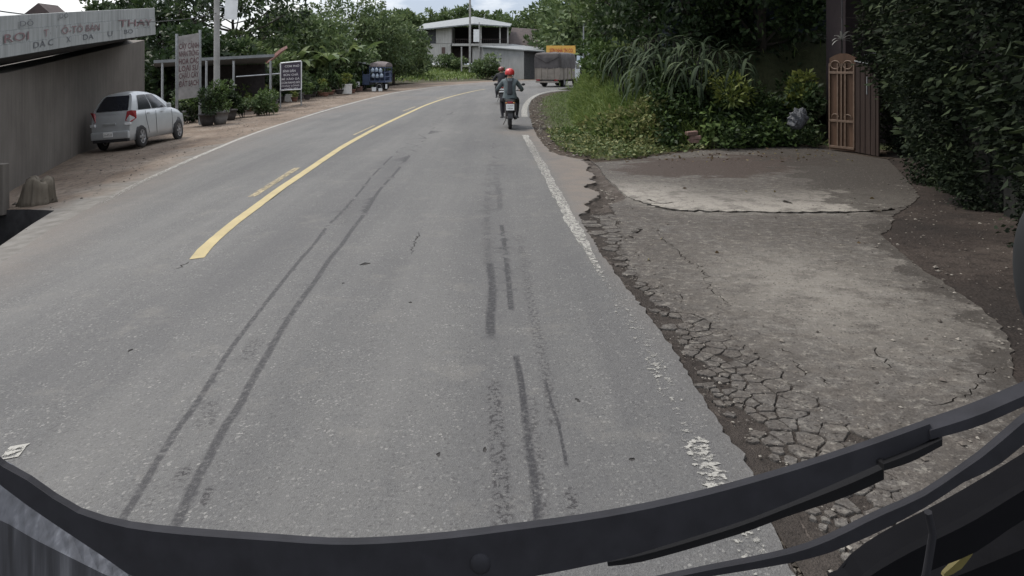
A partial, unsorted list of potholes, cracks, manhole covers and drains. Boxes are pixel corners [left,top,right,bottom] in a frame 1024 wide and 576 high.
crack [924,372,990,406]
crack [579,198,914,576]
